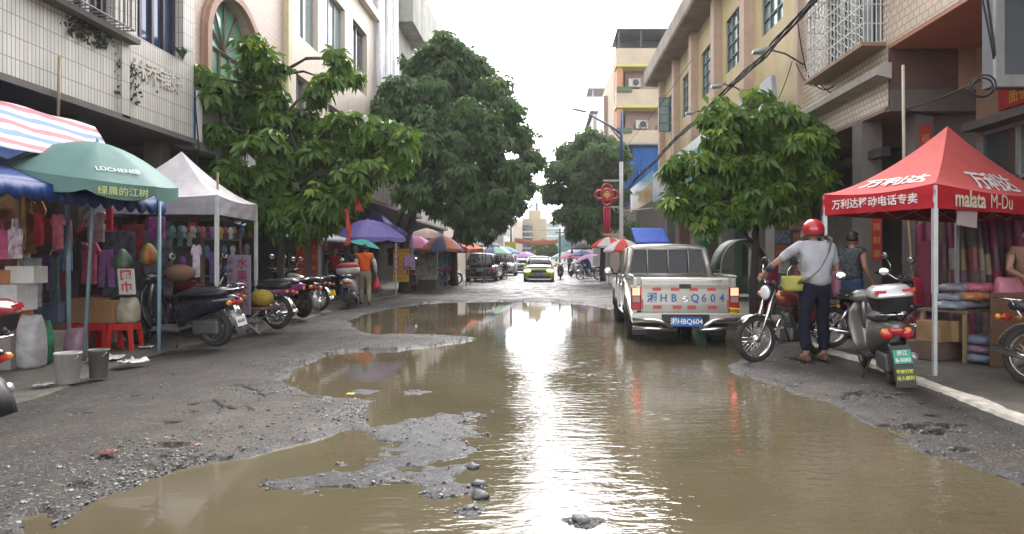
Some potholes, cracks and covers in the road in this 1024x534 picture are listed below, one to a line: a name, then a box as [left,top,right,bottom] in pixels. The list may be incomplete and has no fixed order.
crack [213,383,279,411]
pothole [21,299,1024,534]
